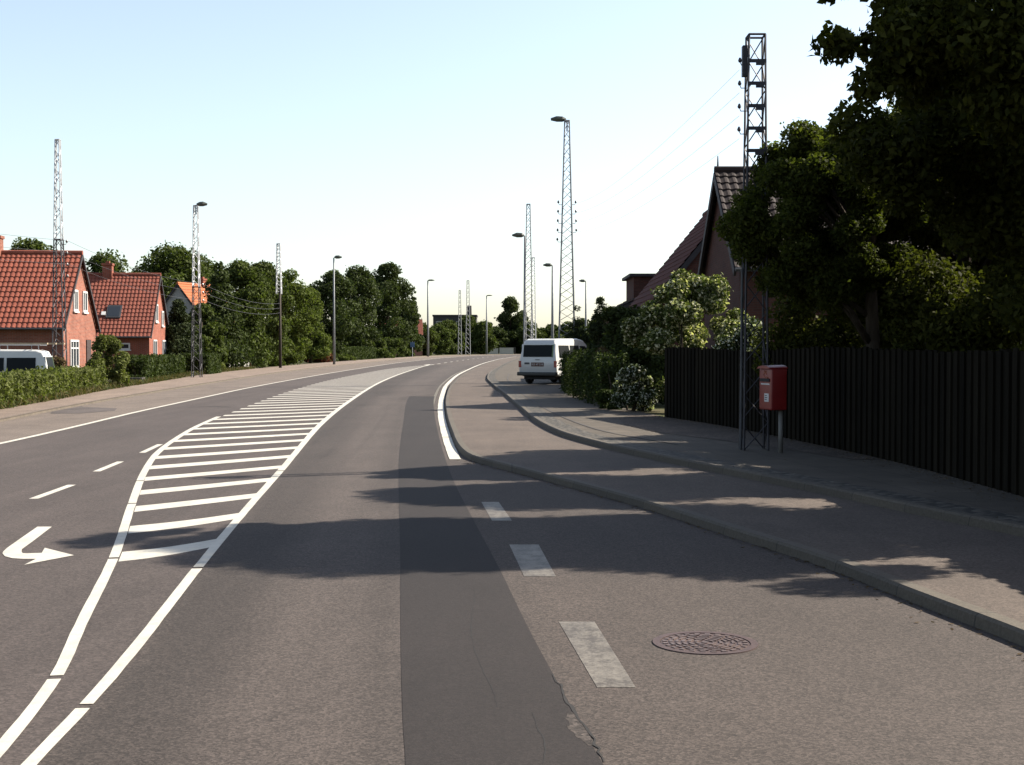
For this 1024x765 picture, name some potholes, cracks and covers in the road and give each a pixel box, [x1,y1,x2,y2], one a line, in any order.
manhole cover [652,631,758,655]
crack [532,674,604,764]
crack [470,590,497,703]
